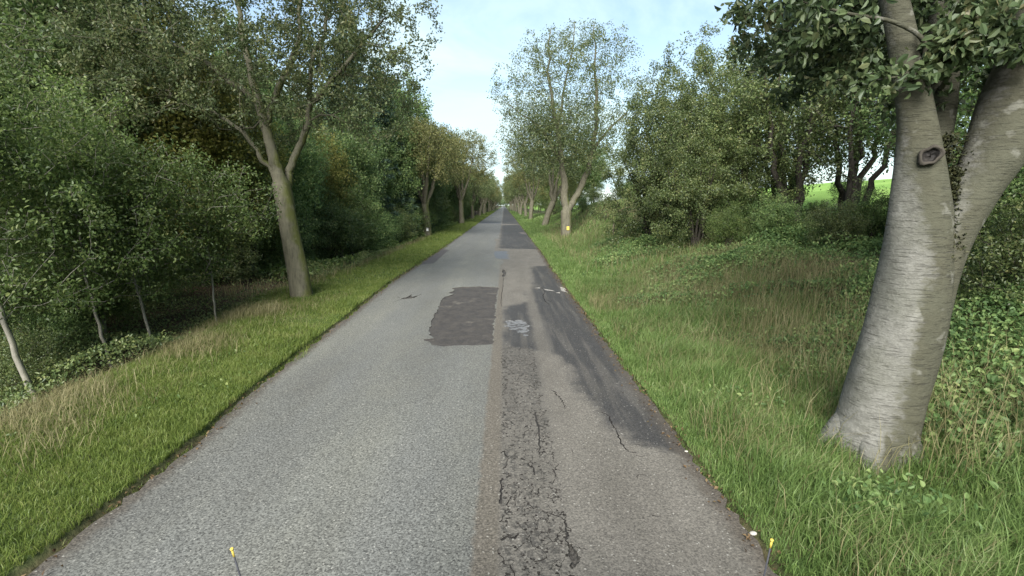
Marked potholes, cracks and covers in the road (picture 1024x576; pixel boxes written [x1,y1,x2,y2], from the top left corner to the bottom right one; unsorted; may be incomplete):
crack [498,345,587,576]
crack [588,398,644,457]
